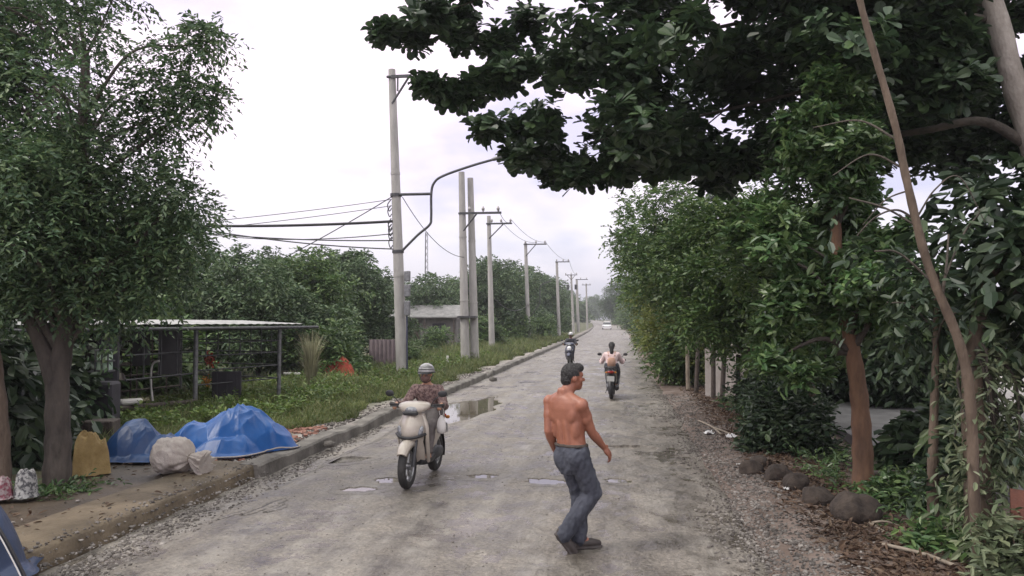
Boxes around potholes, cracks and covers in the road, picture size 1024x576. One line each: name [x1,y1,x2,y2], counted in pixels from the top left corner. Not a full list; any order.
pothole [510,475,567,487]
pothole [445,396,509,425]
pothole [455,472,510,481]
pothole [362,475,421,485]
pothole [314,454,382,466]
pothole [325,484,391,494]
